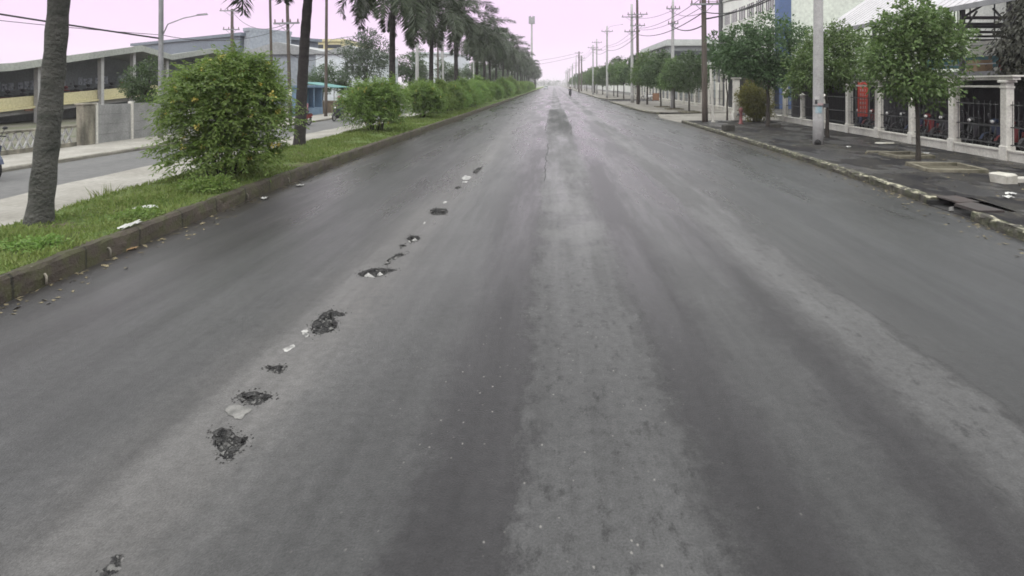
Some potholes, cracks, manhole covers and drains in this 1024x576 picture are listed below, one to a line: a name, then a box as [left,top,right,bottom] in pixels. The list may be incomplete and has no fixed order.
pothole [231,388,278,407]
pothole [206,423,254,464]
pothole [426,207,449,216]
pothole [96,554,124,576]
pothole [306,305,352,336]
pothole [354,267,397,279]
pothole [262,363,289,374]
